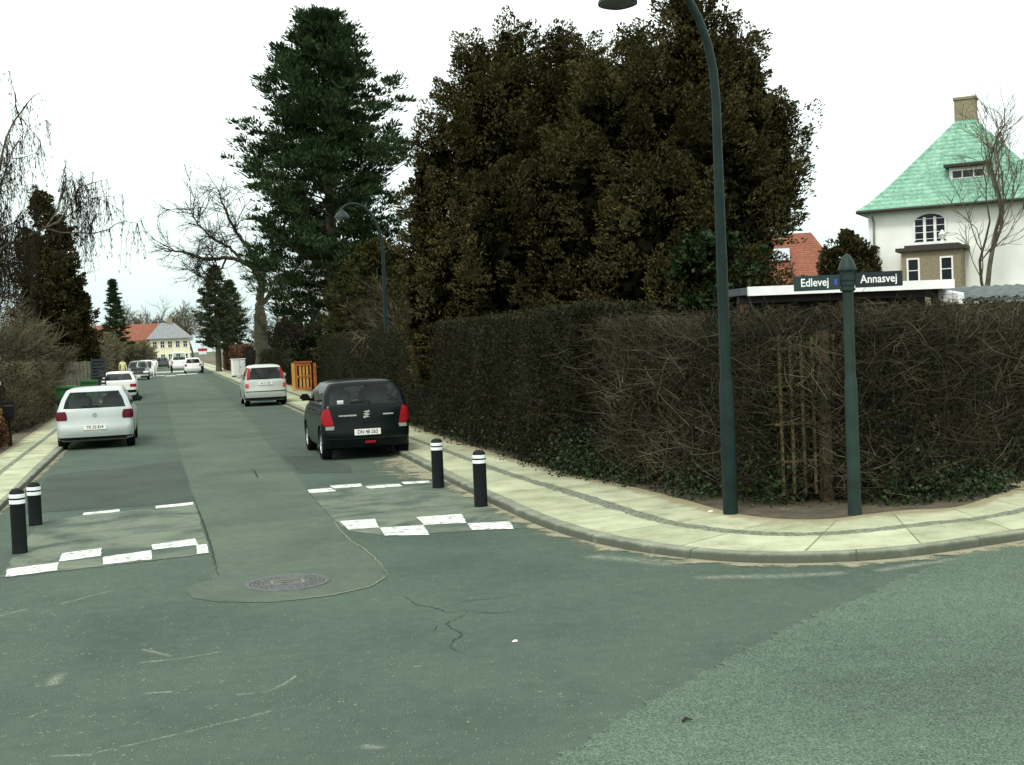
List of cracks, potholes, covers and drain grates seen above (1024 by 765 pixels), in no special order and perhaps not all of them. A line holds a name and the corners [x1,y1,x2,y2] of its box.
manhole cover [244,573,331,592]
crack [403,595,516,654]
